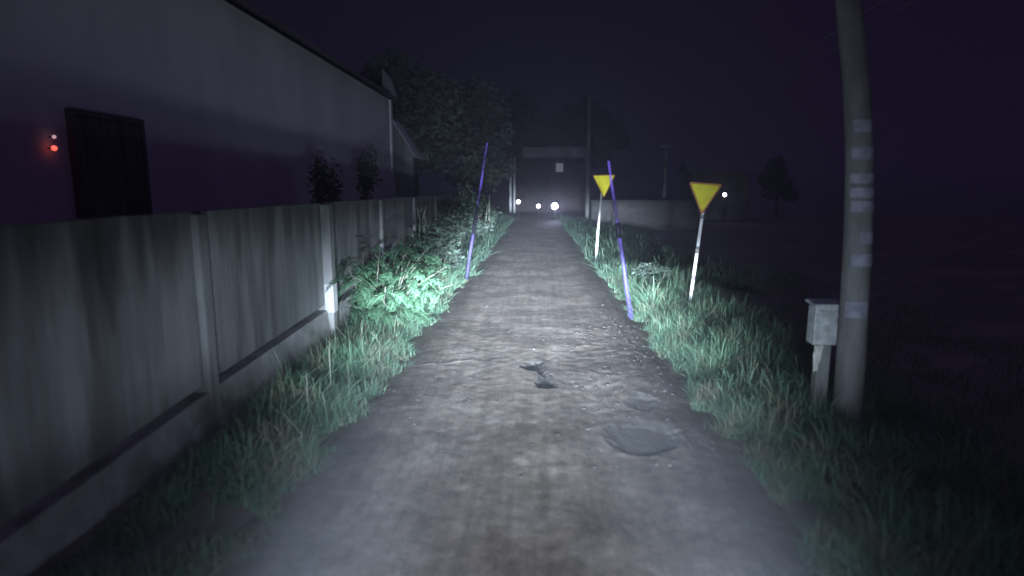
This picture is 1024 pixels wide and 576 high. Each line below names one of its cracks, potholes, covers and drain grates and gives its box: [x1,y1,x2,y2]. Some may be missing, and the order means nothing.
pothole [592,416,696,462]
pothole [512,358,566,392]
pothole [614,389,670,414]
